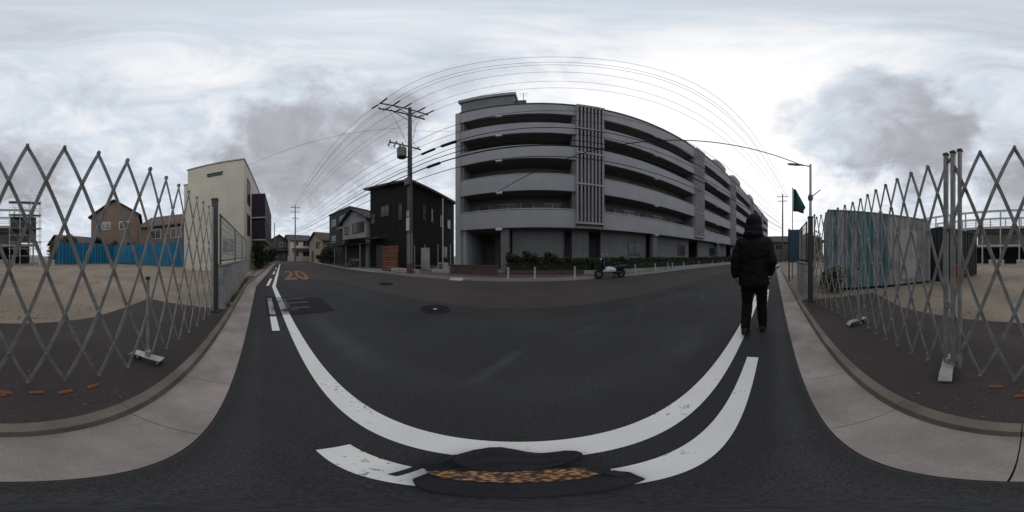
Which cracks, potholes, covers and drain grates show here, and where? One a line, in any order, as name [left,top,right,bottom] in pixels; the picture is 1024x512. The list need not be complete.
manhole cover [420,305,450,314]
